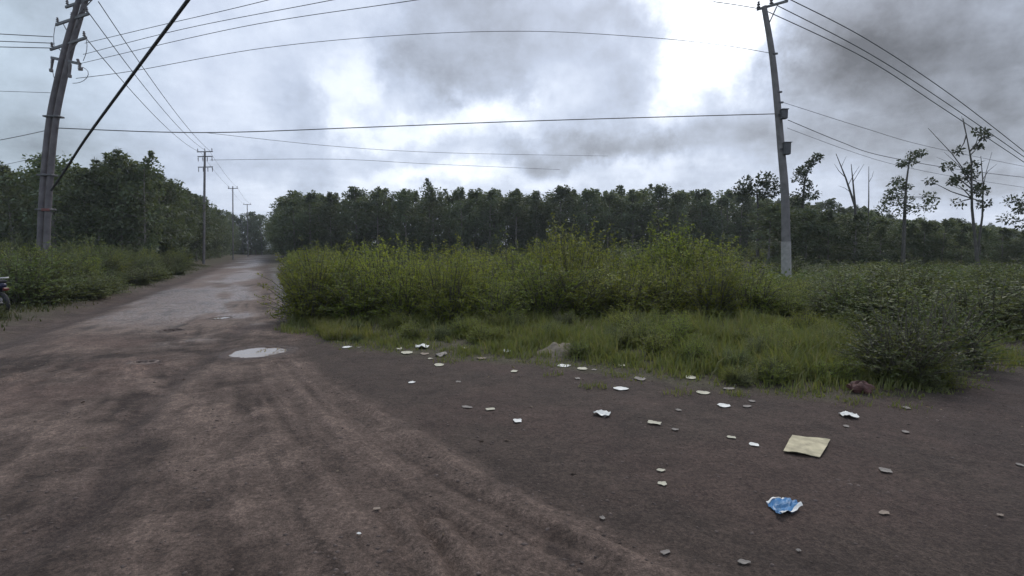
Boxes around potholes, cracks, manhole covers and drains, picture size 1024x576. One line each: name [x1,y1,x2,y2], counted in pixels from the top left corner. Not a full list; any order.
pothole [219,345,299,360]
